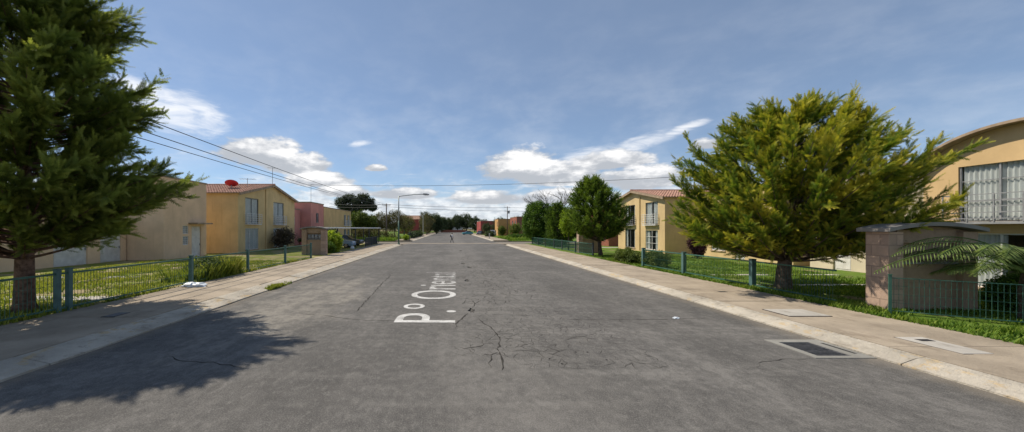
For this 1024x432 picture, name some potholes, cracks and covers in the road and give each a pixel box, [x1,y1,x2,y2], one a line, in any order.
utility cover [762,309,833,317]
drain grate [765,340,876,358]
utility cover [895,337,994,354]
crack [313,258,693,370]
